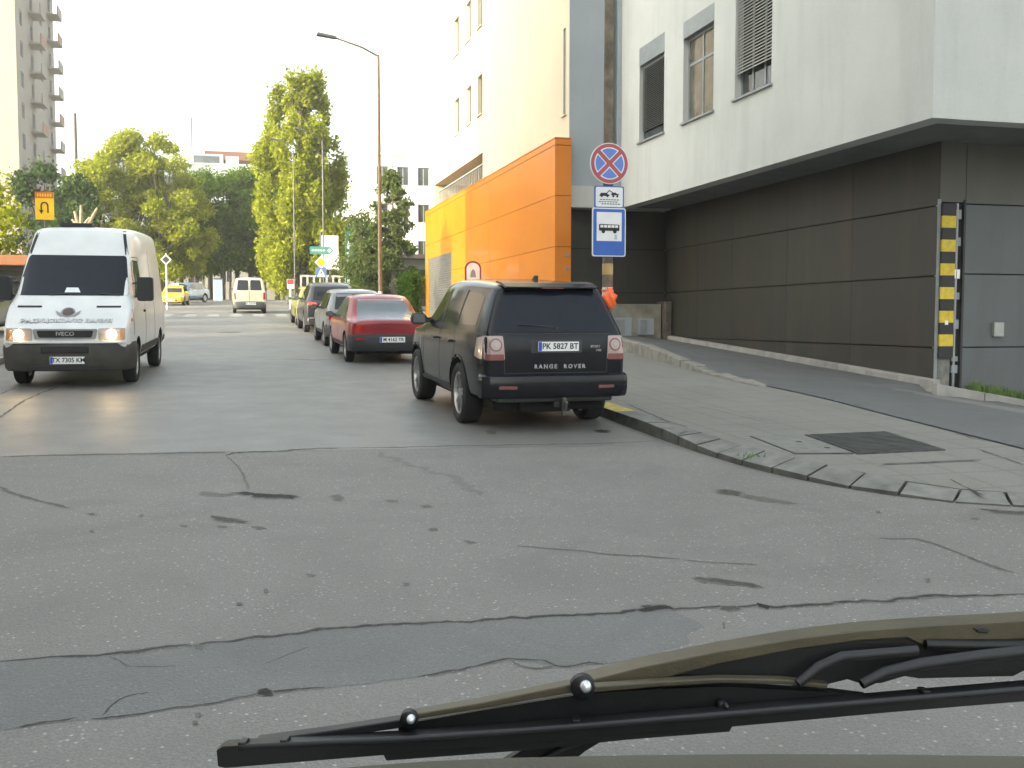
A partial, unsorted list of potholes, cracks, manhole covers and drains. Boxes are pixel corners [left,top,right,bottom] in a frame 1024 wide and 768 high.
crack [0,593,1023,677]
manhole cover [805,431,945,455]
crack [96,687,325,719]
crack [0,487,68,508]
crack [225,448,336,489]
crack [882,538,1012,572]
crack [521,546,758,565]
